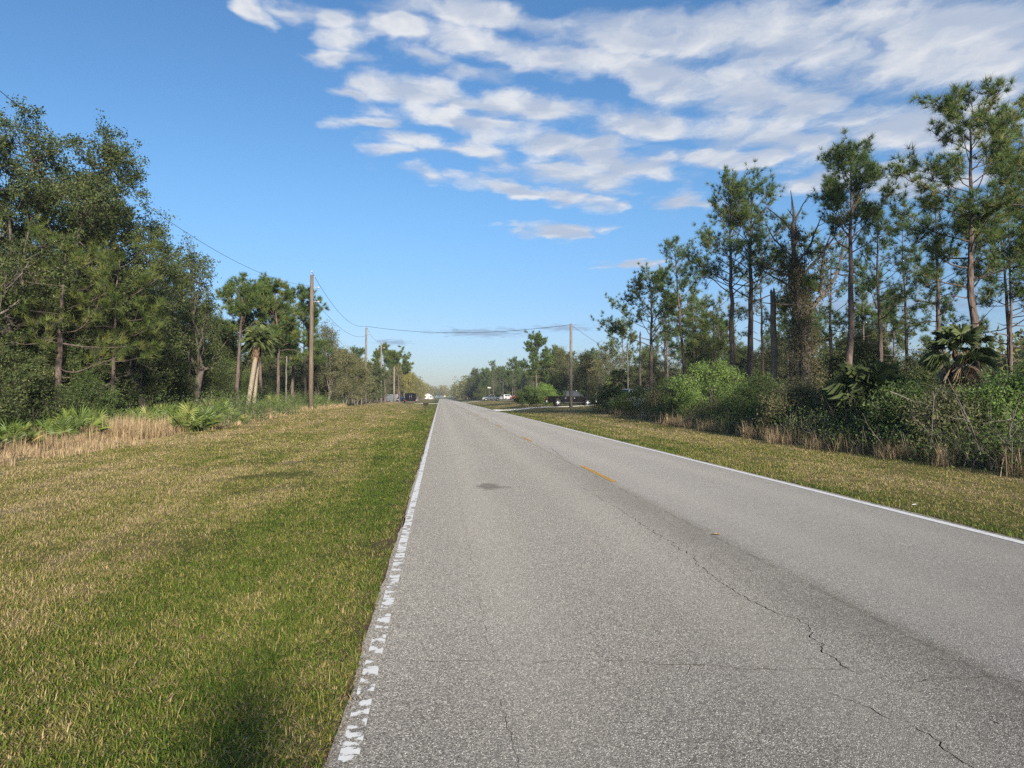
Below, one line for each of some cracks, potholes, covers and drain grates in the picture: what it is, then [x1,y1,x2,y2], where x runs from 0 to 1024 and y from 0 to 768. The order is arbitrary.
crack [390,447,973,768]
